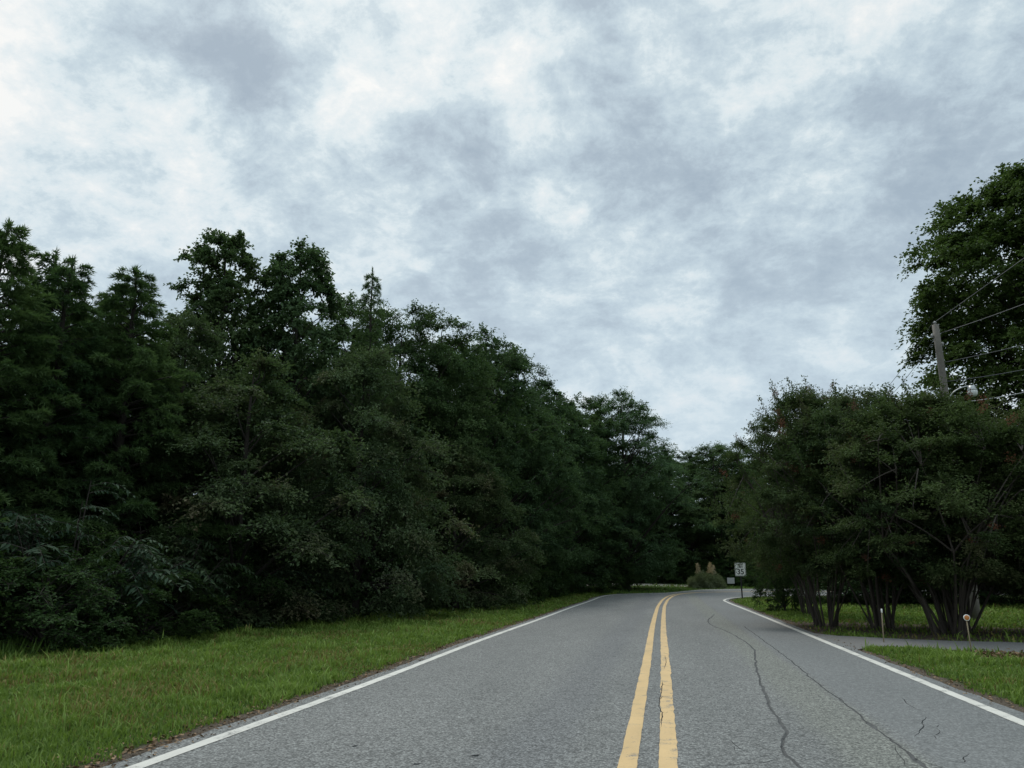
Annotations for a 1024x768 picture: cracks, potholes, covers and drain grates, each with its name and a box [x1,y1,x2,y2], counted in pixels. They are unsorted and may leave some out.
crack [707,614,942,768]
